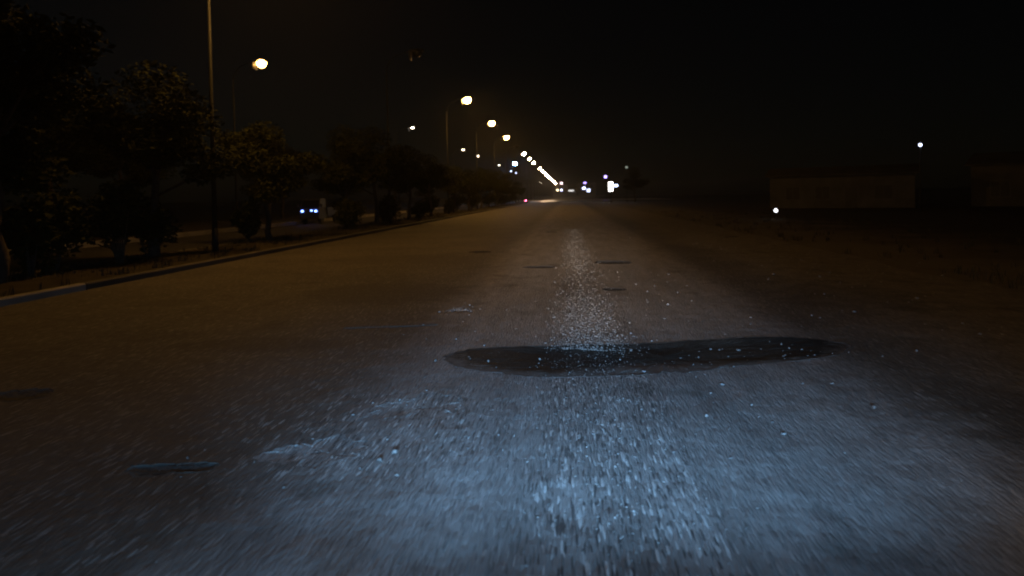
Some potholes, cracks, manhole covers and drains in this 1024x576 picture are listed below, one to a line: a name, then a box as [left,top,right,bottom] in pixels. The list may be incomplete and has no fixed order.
pothole [443,337,853,378]
pothole [124,462,221,477]
pothole [0,388,58,402]
